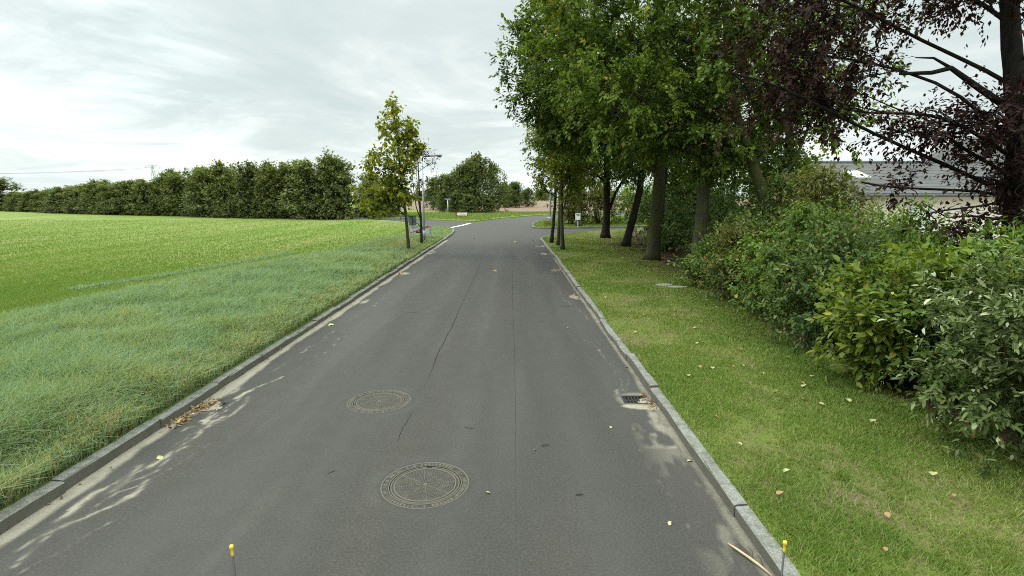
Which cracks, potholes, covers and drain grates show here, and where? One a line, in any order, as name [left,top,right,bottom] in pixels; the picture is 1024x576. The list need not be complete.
manhole cover [380,462,469,509]
manhole cover [347,390,411,413]
drain grate [621,396,652,404]
crack [426,265,480,382]
